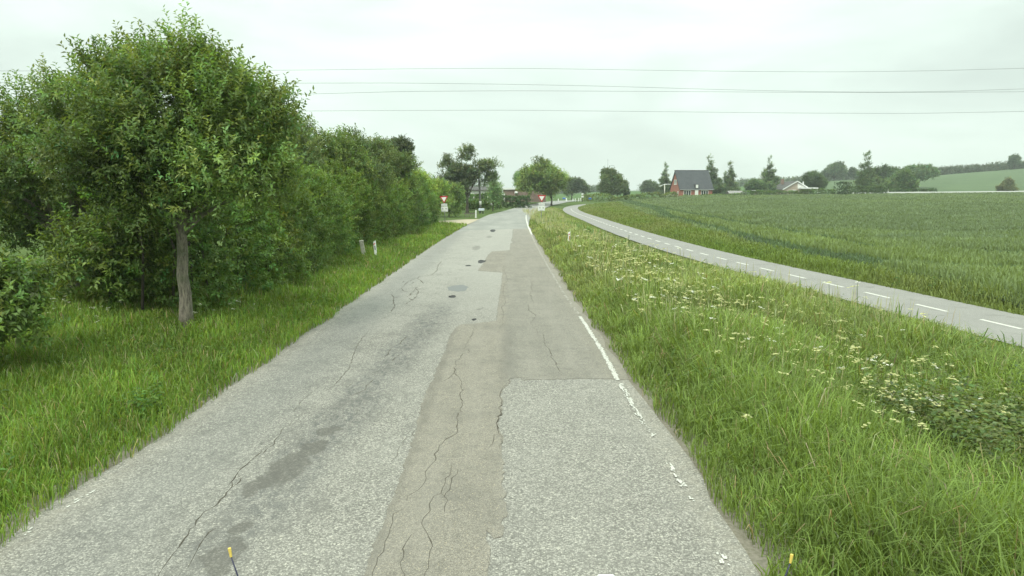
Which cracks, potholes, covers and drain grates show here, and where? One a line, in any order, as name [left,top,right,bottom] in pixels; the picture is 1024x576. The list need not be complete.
crack [158,333,376,576]
crack [385,260,444,315]
crack [372,326,475,576]
